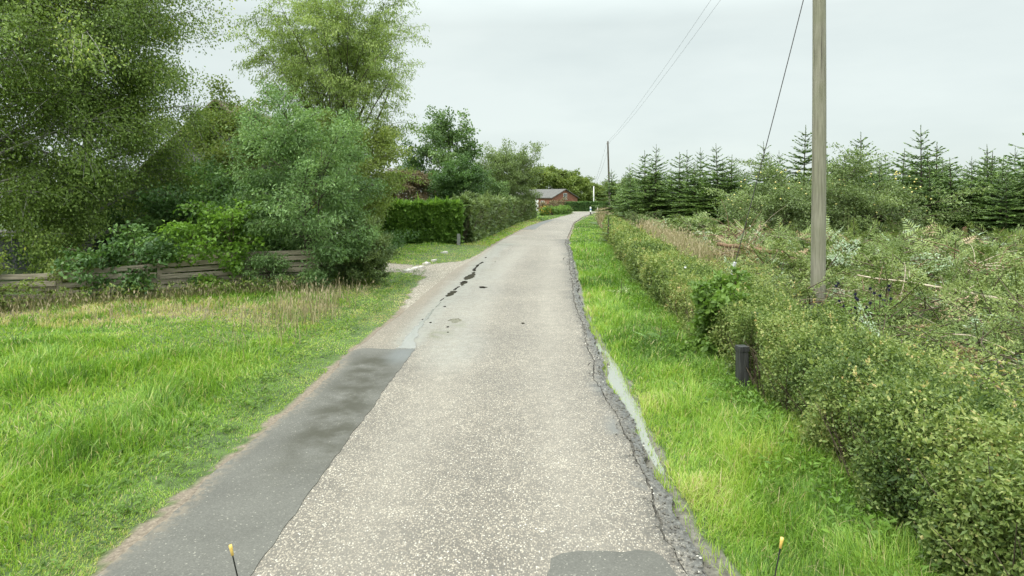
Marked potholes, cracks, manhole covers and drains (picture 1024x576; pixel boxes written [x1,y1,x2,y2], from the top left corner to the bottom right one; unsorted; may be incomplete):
crack [563,243,688,575]
